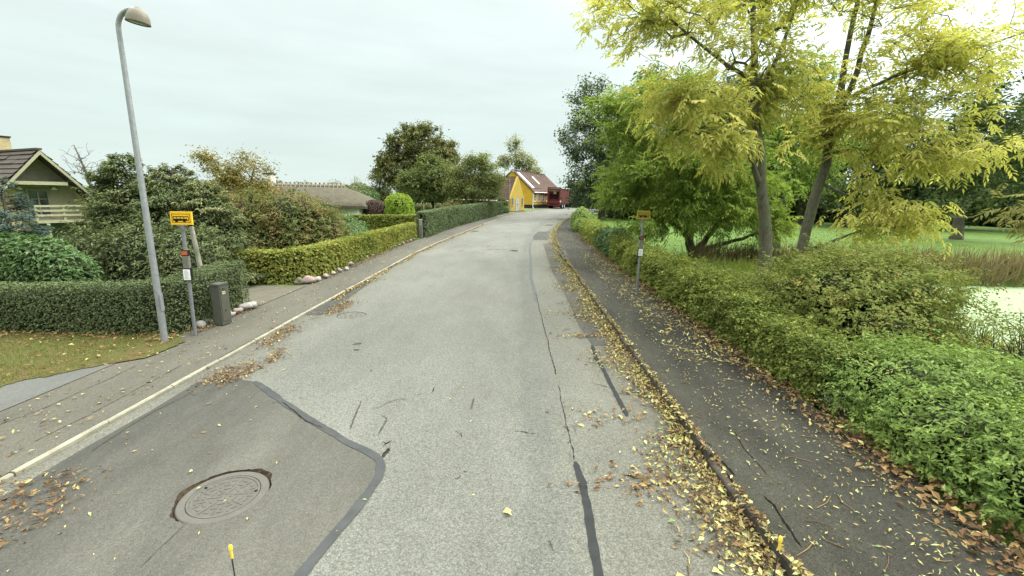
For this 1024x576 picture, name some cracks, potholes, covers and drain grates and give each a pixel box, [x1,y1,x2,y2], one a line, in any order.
crack [708,432,767,475]
crack [764,496,801,546]
manhole cover [169,468,272,524]
